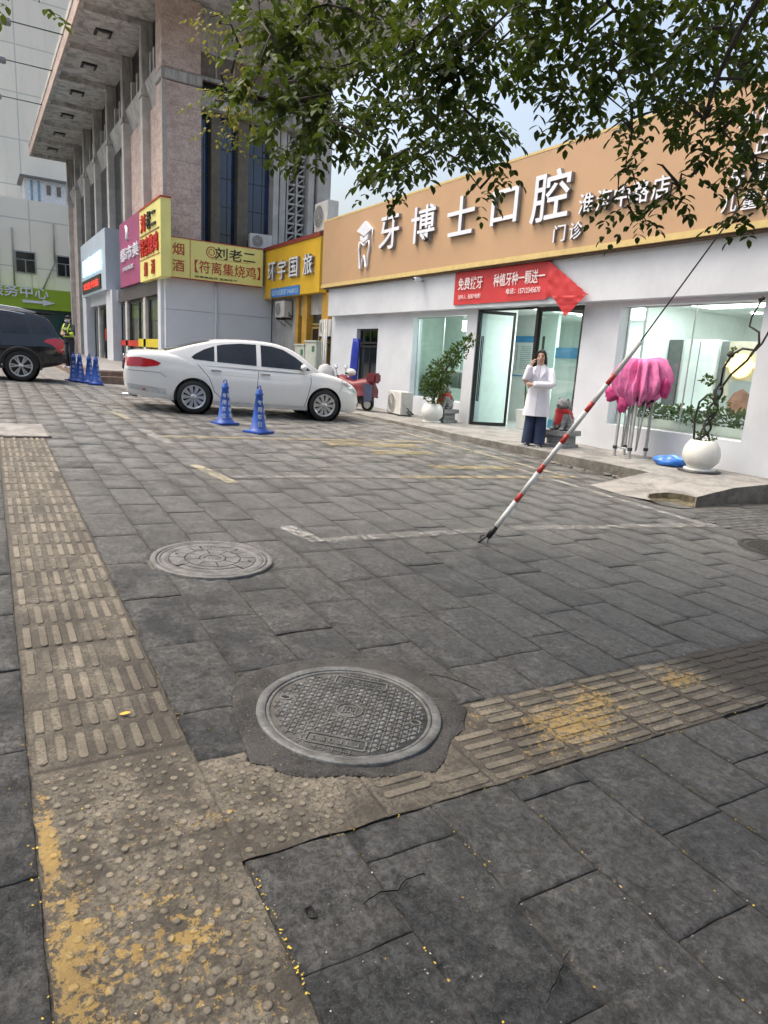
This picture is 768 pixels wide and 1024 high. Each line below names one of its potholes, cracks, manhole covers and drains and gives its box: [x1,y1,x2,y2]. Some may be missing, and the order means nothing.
crack [546,950,570,1003]
manhole cover [150,541,273,581]
crack [363,873,425,905]
manhole cover [256,666,441,767]
manhole cover [738,538,768,556]
